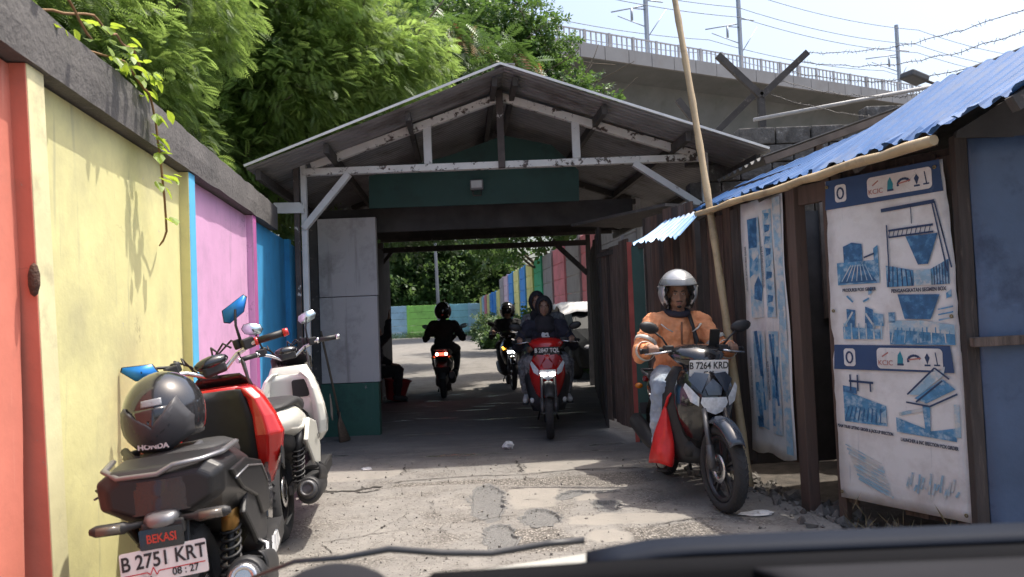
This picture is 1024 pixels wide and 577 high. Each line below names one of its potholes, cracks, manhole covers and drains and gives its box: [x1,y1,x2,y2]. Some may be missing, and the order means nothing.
pothole [465,483,508,523]
pothole [590,499,623,512]
pothole [481,523,522,550]
pothole [555,489,620,500]
pothole [517,508,564,528]
